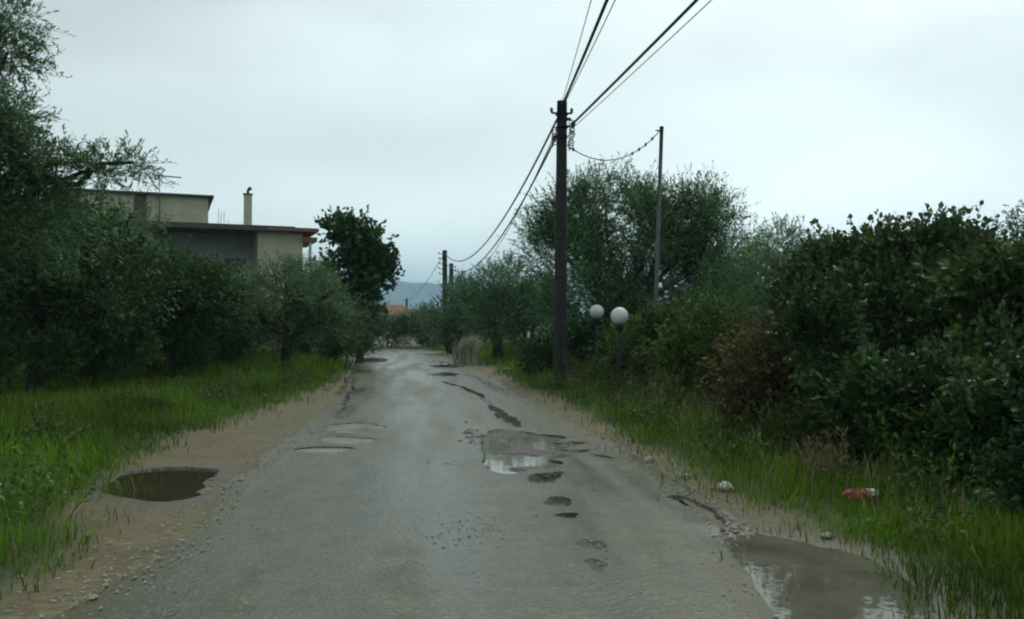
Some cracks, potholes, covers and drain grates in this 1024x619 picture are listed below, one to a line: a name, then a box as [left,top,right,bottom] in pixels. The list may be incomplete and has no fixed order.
pothole [575,539,608,550]
crack [340,376,358,413]
pothole [583,558,608,572]
crack [441,381,485,399]
pothole [100,467,220,496]
pothole [526,472,564,483]
pothole [488,403,522,427]
pothole [543,496,572,507]
pothole [481,429,591,472]
